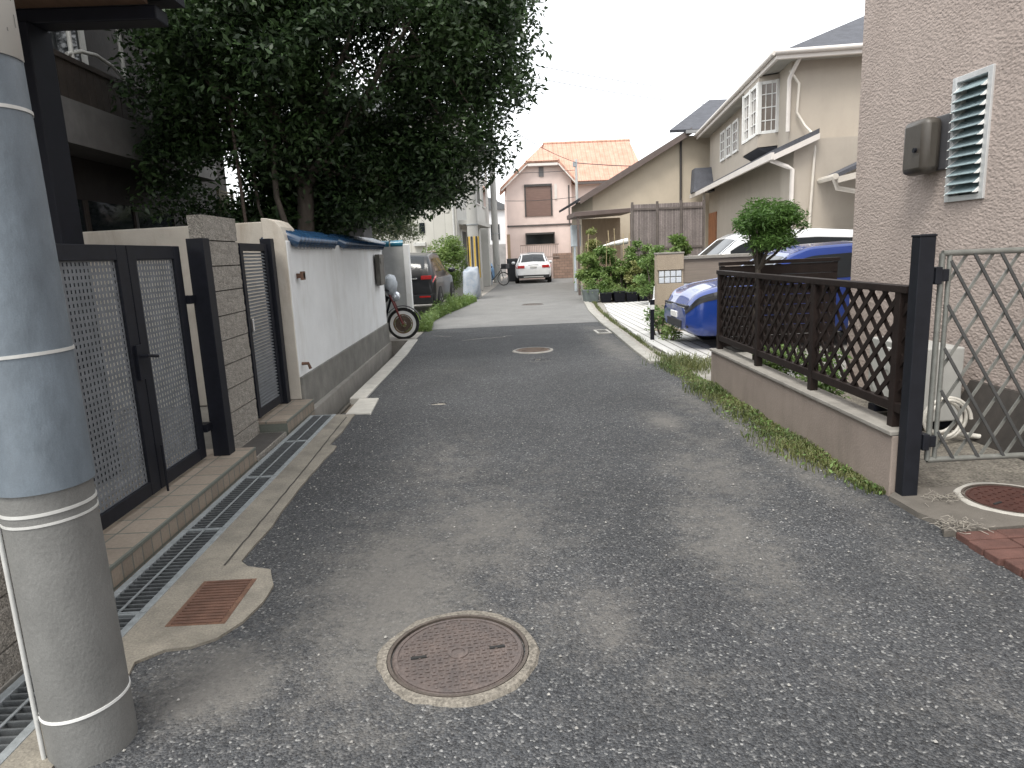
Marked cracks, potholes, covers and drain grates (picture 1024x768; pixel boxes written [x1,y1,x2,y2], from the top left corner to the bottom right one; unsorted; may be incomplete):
drain grate [184,475,277,530]
drain grate [114,528,227,614]
drain grate [242,440,311,477]
manhole cover [376,610,540,708]
manhole cover [953,482,1024,517]
drain grate [282,414,336,441]
